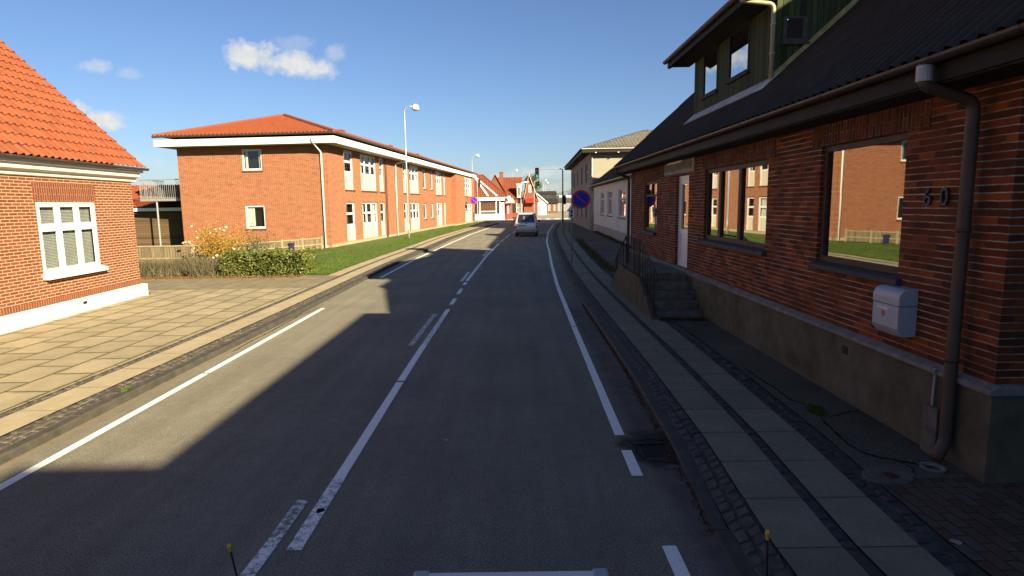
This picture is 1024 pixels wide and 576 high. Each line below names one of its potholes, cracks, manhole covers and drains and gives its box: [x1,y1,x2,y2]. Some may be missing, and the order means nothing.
crack [744,368,934,476]
manhole cover [861,465,916,484]
